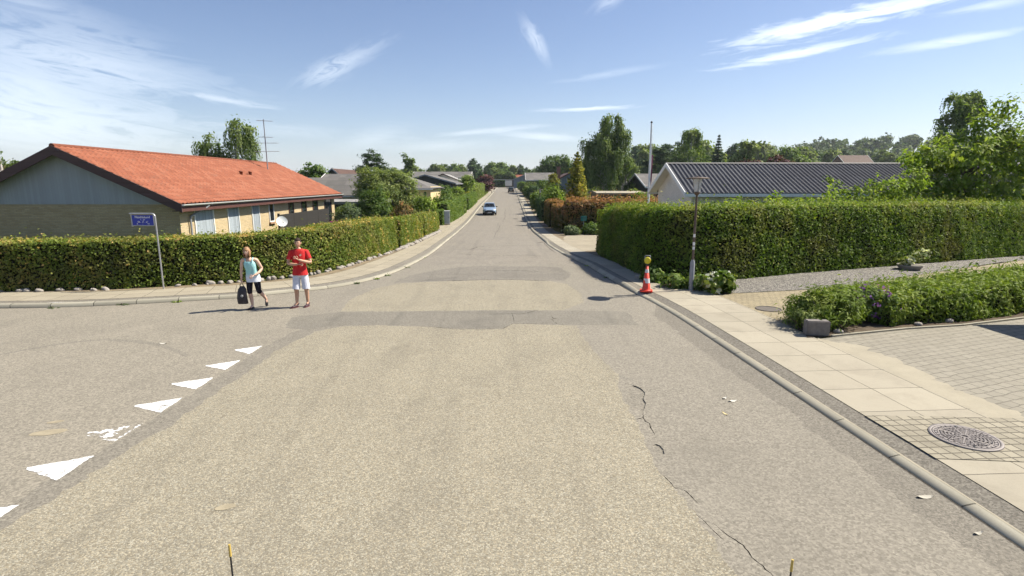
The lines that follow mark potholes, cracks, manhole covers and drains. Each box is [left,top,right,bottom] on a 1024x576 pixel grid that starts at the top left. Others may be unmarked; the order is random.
crack [663,475,773,576]
manhole cover [928,424,1005,452]
